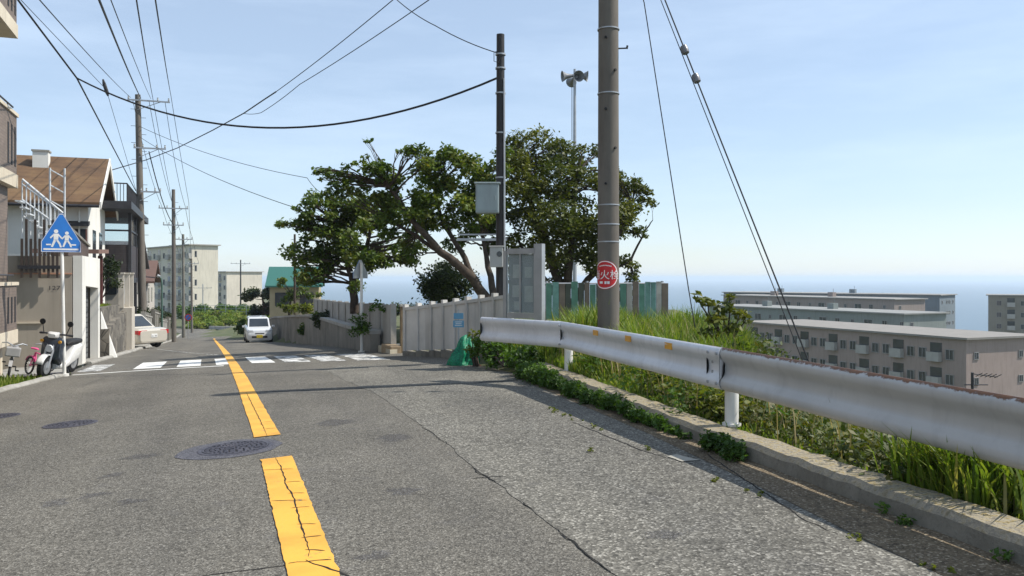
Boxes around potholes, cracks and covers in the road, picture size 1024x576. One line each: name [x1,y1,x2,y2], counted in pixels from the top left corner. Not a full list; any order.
manhole cover [174,439,282,460]
manhole cover [41,419,98,429]
